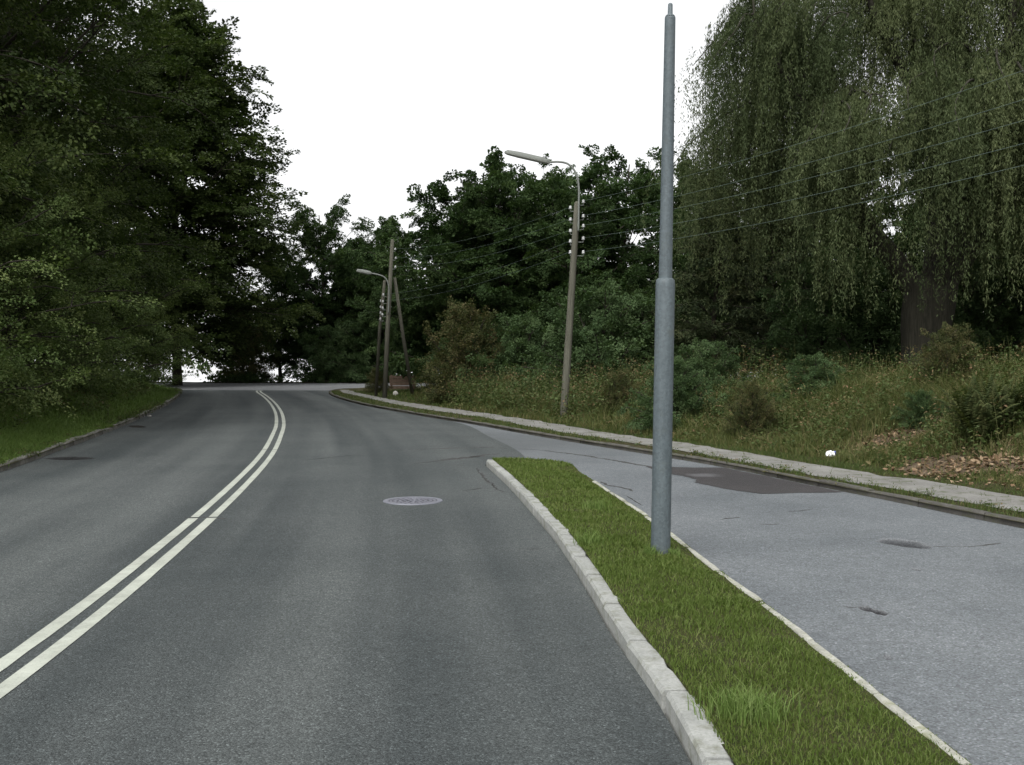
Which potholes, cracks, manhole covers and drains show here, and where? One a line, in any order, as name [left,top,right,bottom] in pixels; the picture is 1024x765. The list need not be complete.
pothole [876,538,933,549]
pothole [858,606,889,616]
crack [412,447,504,492]
crack [530,449,646,506]
manhole cover [383,496,443,505]
